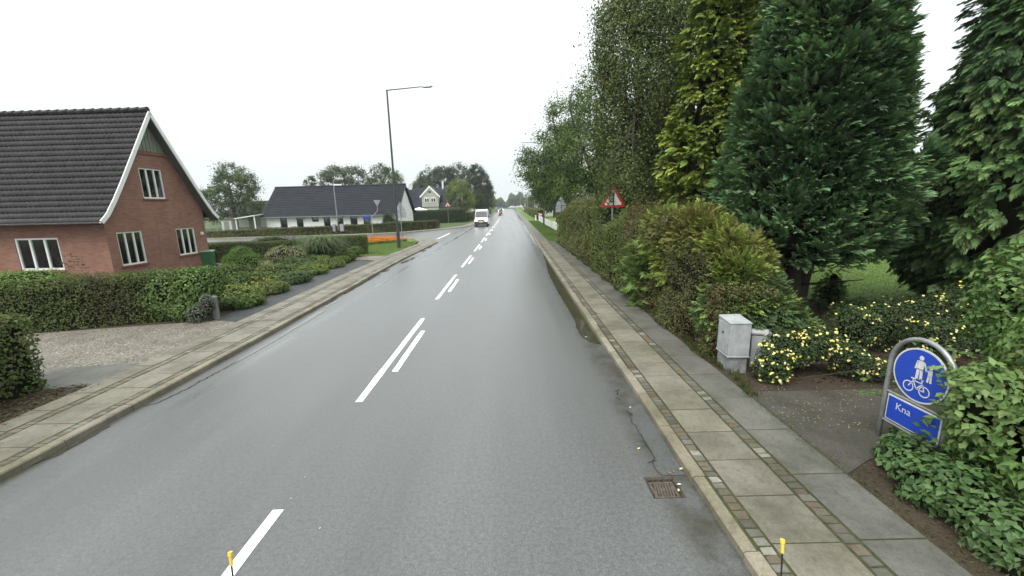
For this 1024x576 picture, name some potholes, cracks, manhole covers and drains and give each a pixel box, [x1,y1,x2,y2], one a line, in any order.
crack [616,390,660,474]
drain grate [643,476,687,499]
